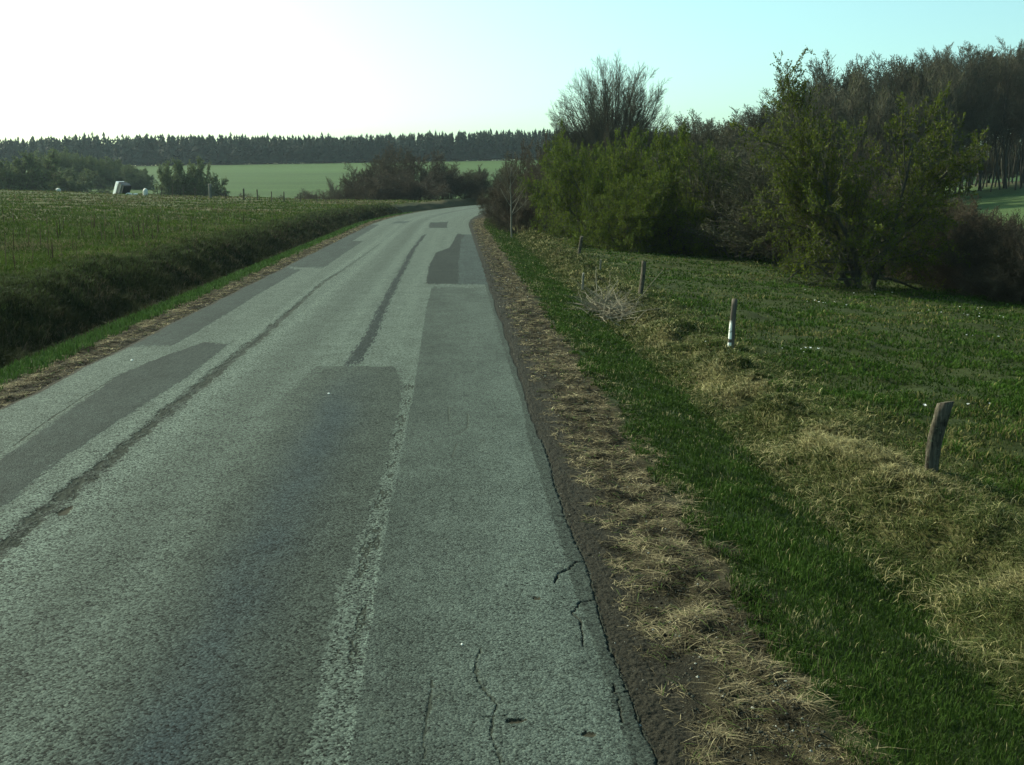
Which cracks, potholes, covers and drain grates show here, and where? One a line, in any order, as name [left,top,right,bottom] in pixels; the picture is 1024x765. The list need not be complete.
crack [474,648,507,764]
crack [541,439,660,765]
